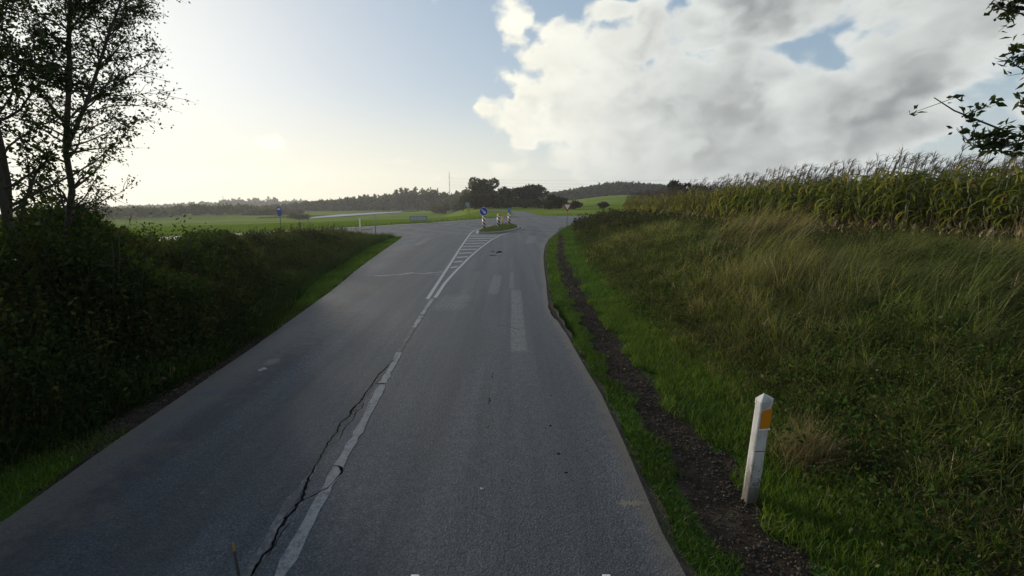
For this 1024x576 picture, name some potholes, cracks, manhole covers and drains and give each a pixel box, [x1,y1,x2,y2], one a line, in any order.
crack [252,360,394,576]
